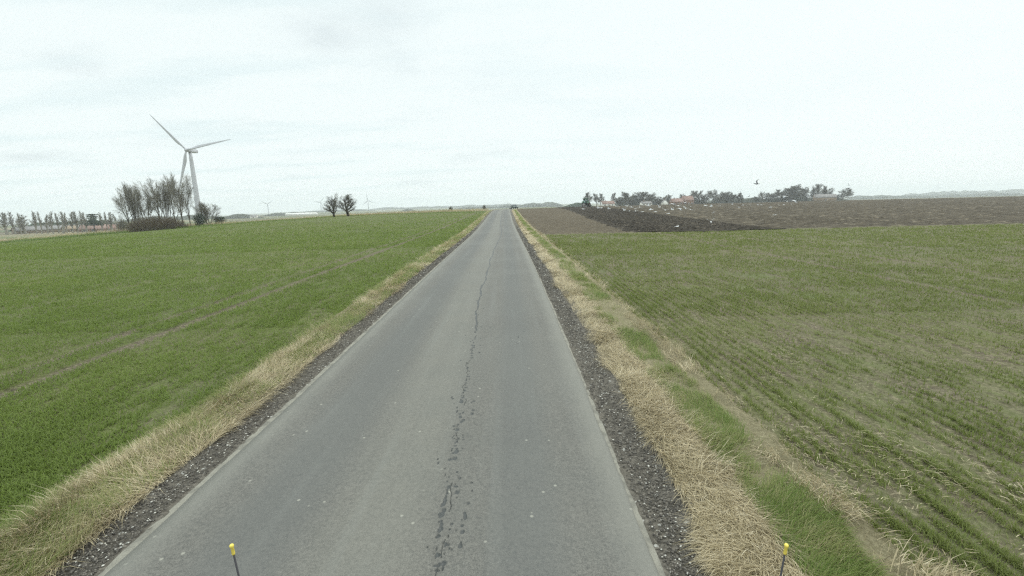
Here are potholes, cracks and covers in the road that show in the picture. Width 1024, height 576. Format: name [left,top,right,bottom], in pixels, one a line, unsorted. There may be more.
crack [427,215,502,576]
